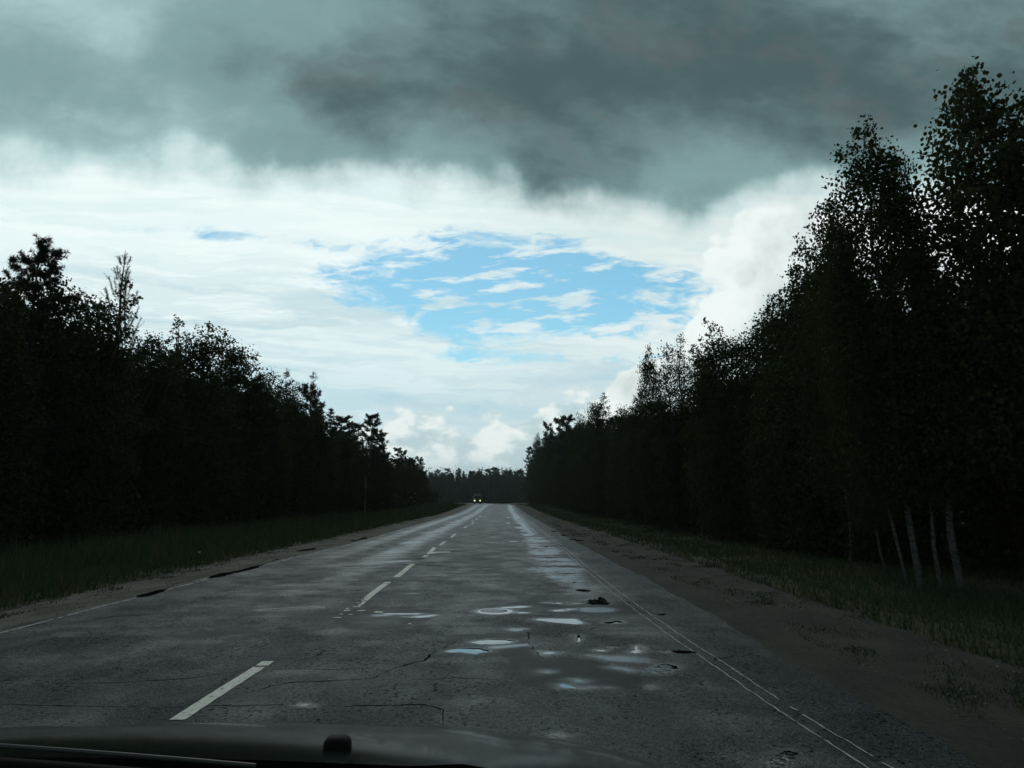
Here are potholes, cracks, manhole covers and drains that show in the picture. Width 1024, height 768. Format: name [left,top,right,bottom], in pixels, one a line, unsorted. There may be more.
pothole [586,596,610,605]
pothole [763,750,798,768]
pothole [207,565,262,579]
pothole [642,664,679,674]
crack [206,641,514,725]
